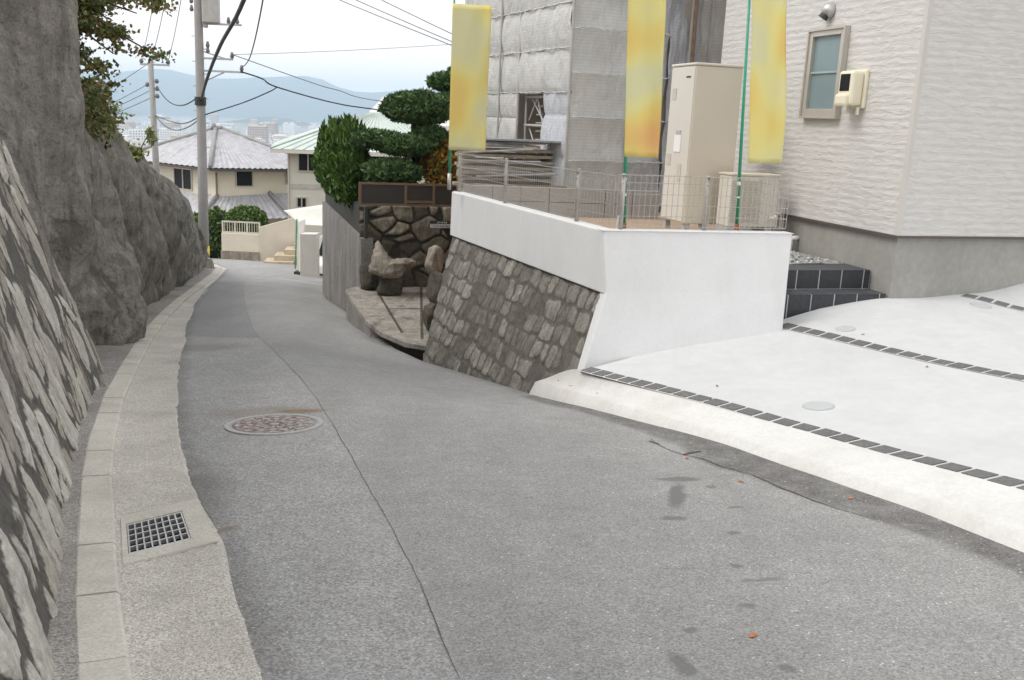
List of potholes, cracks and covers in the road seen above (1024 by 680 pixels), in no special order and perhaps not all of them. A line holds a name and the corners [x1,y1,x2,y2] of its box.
manhole cover [224,413,323,436]
utility cover [802,401,835,411]
crack [650,439,875,519]
drain grate [121,498,218,565]
